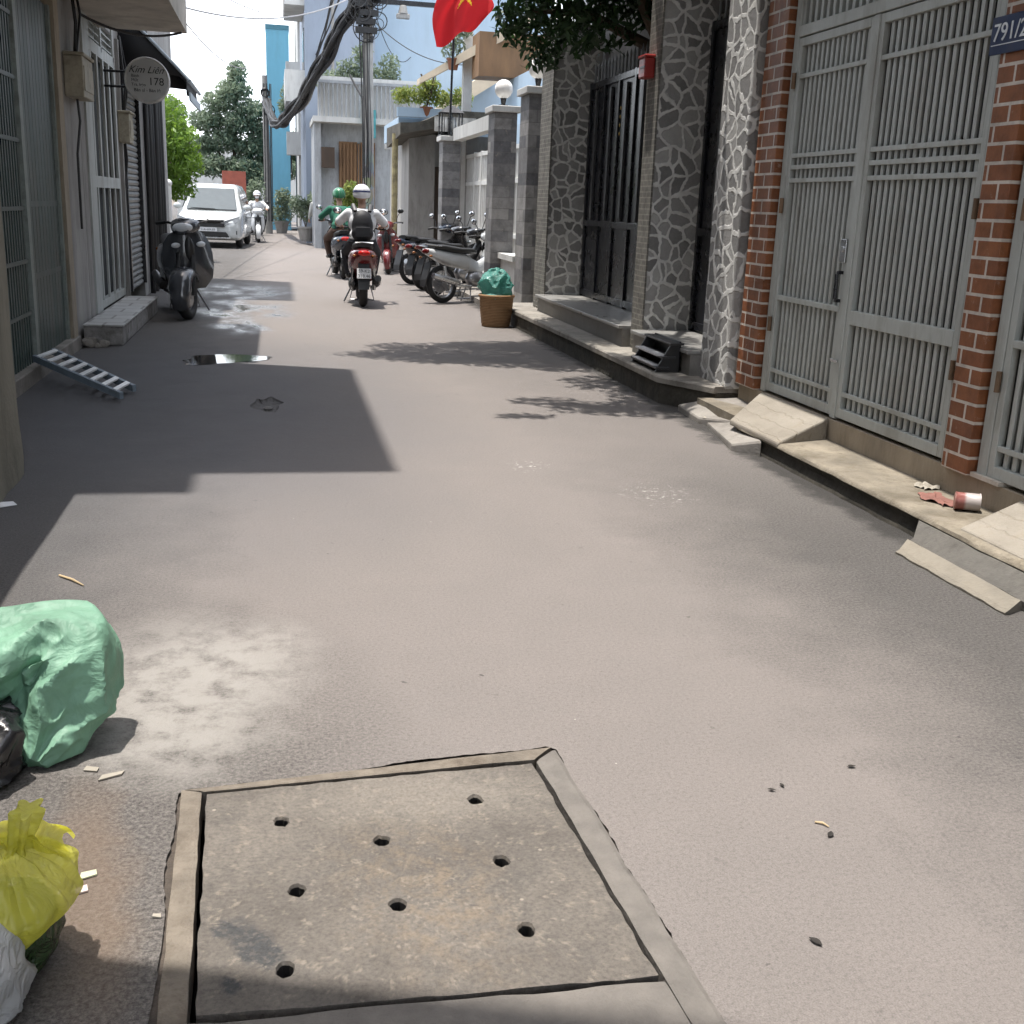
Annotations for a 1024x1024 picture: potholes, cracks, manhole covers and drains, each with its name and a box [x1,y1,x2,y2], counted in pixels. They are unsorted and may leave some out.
manhole cover [148,746,726,1024]
pothole [250,397,284,412]
